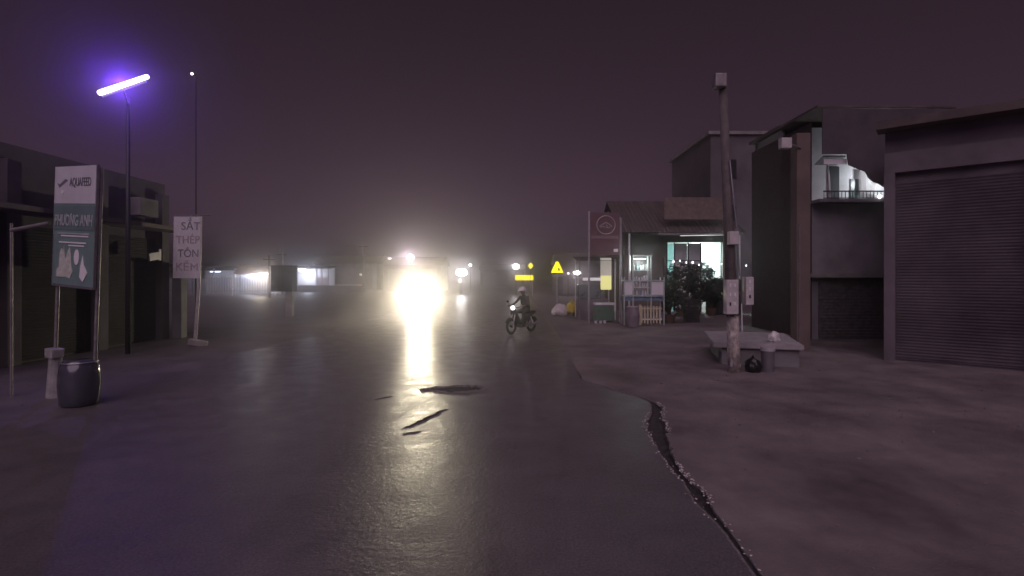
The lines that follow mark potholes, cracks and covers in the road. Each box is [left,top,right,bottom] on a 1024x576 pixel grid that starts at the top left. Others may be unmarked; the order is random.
pothole [418,385,487,394]
crack [580,378,765,576]
crack [376,396,448,434]
